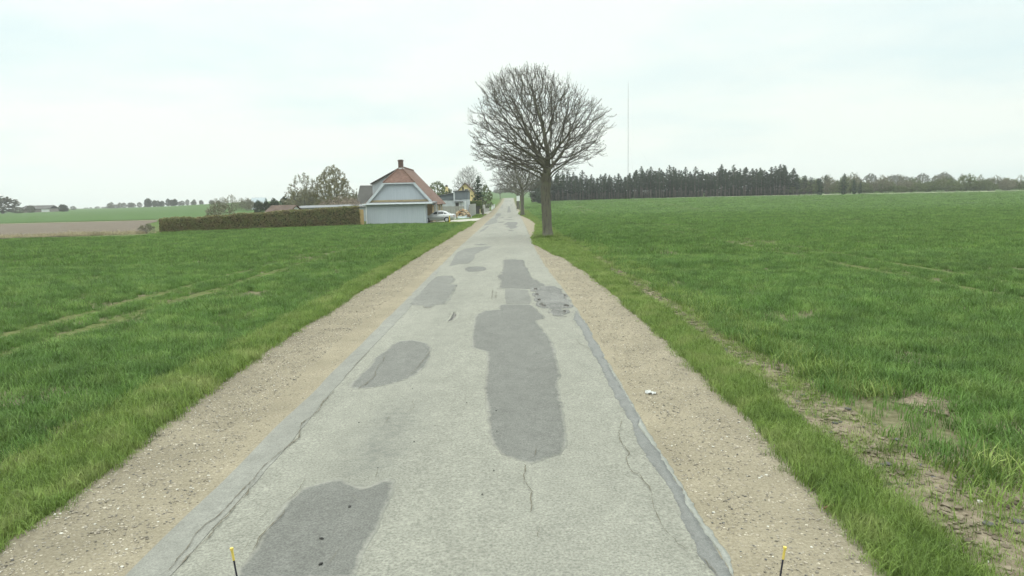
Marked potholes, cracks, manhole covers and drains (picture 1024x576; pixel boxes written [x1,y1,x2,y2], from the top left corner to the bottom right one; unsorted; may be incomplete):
crack [618,421,717,575]
crack [168,392,333,570]
